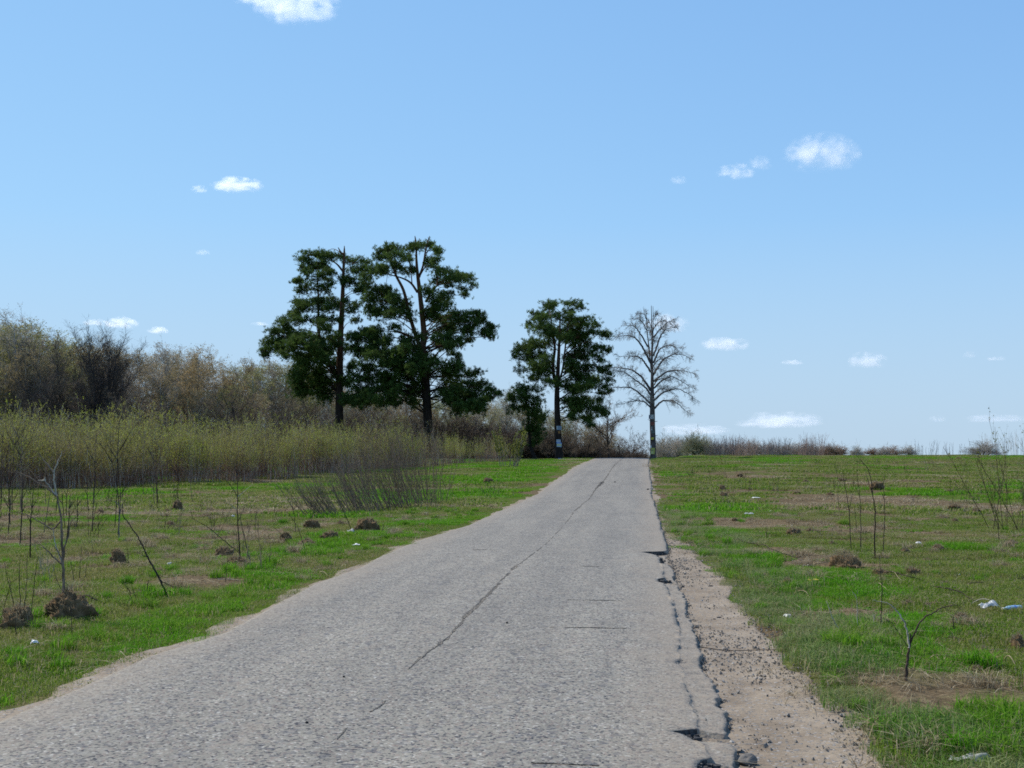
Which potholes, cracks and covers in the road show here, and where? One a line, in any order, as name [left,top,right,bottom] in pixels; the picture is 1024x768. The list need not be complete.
pothole [698,760,721,768]
pothole [645,551,674,567]
pothole [674,729,742,751]
crack [337,458,623,739]
